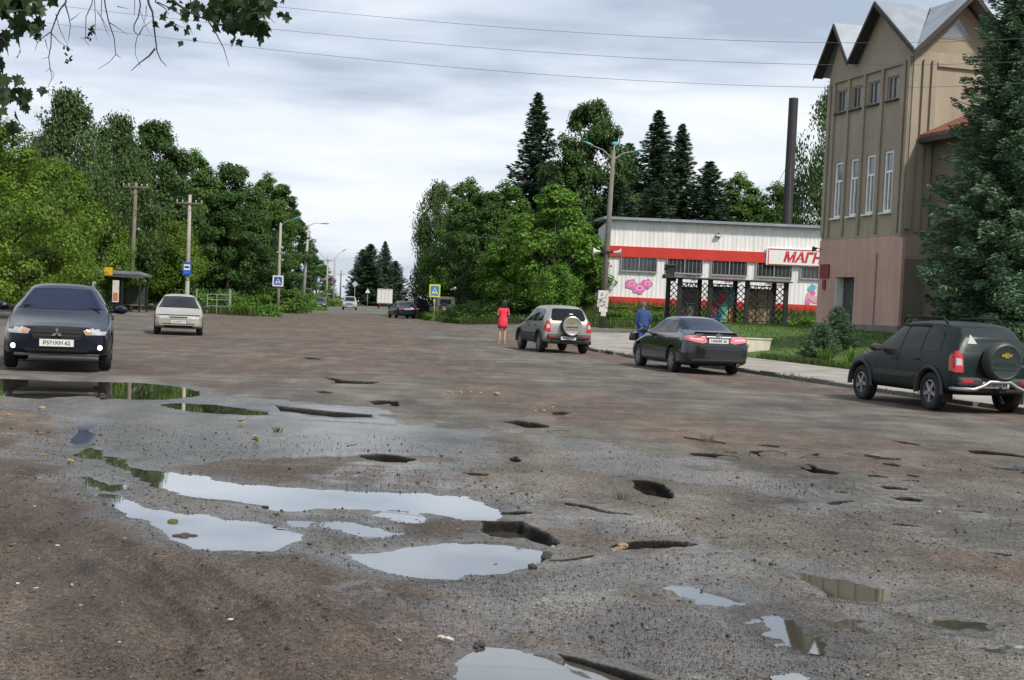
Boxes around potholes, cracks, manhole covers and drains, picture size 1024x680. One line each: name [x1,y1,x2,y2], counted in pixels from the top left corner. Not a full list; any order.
pothole [533,645,668,680]
pothole [459,519,581,554]
pothole [217,403,411,425]
pothole [326,451,441,469]
pothole [609,478,699,505]
pothole [711,448,819,462]
